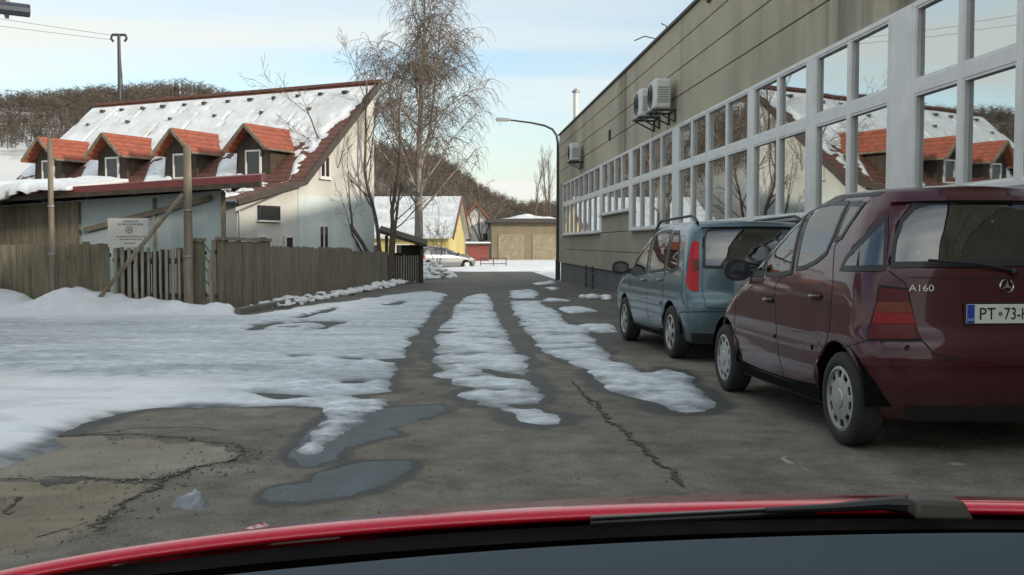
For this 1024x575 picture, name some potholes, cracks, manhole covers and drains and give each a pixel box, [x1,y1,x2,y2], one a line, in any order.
crack [571,380,685,487]
crack [1,427,246,538]
